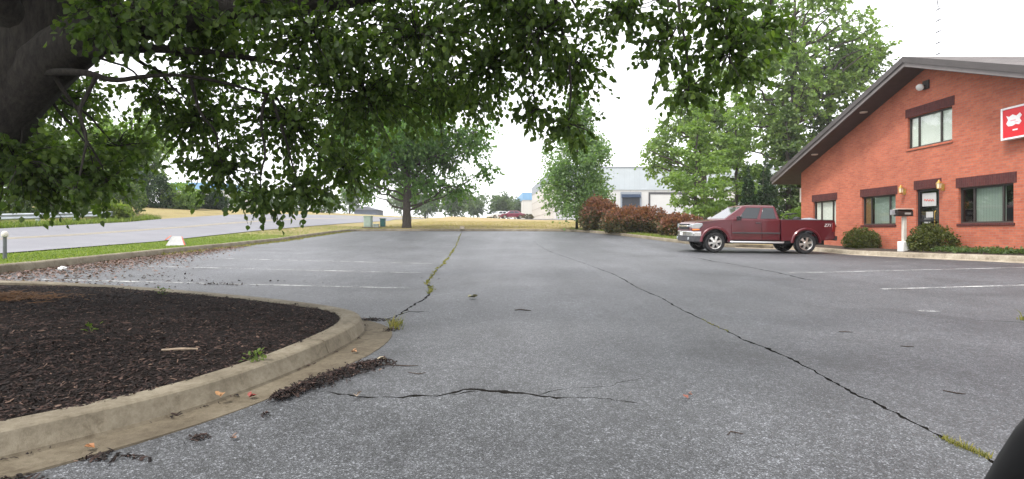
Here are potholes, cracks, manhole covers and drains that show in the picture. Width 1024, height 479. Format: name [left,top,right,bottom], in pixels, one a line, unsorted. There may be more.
crack [383,232,462,320]
crack [326,379,639,404]
crack [537,244,994,464]
